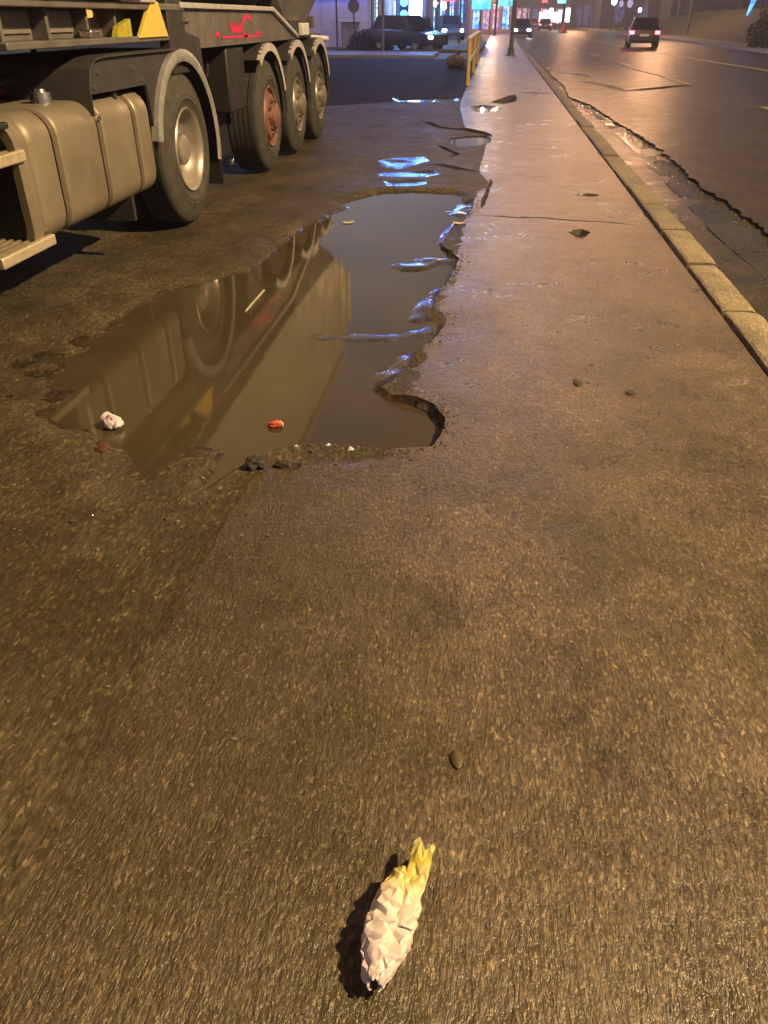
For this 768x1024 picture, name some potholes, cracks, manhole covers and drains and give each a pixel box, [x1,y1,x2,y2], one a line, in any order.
pothole [378,157,429,169]
pothole [0,188,475,516]
pothole [491,94,517,104]
pothole [568,229,590,239]
crack [421,121,632,225]
